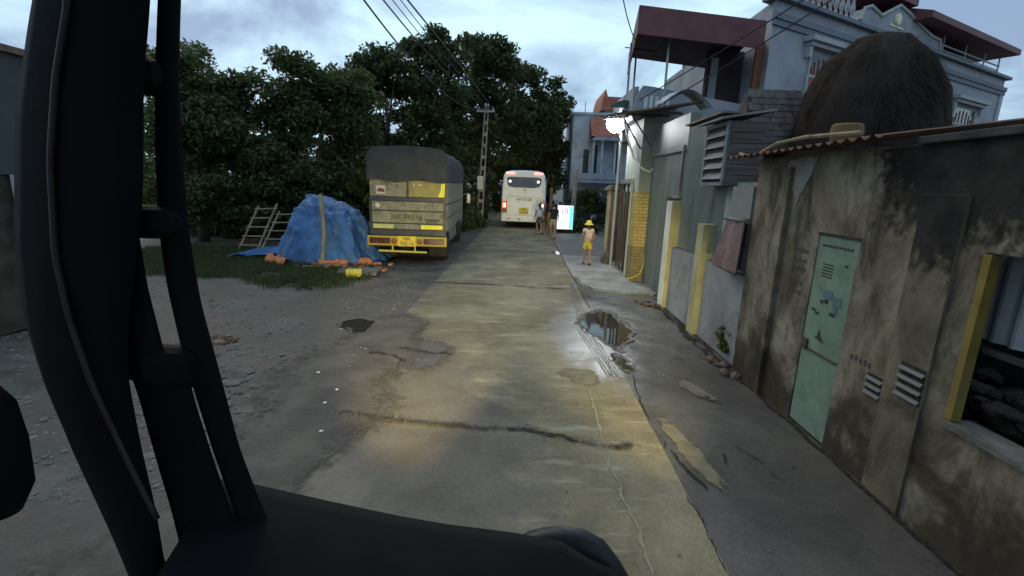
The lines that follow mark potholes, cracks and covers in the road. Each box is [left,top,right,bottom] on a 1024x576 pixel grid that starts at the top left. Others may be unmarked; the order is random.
pothole [574,308,637,353]
crack [339,410,780,489]
pothole [336,315,382,334]
pothole [610,353,637,373]
